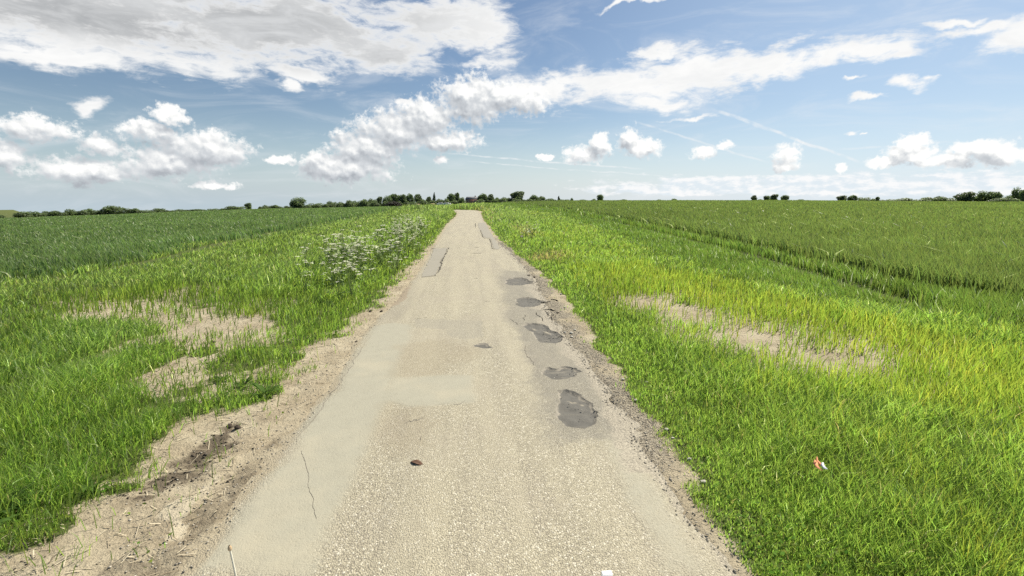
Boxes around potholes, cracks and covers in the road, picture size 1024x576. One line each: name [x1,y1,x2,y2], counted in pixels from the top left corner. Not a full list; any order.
crack [512,299,558,325]
crack [296,343,365,519]
